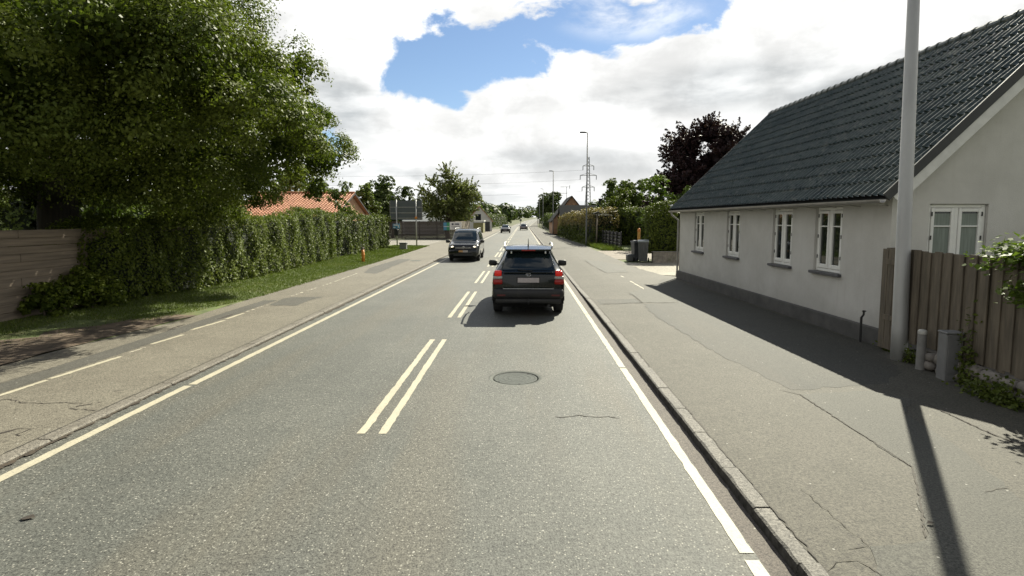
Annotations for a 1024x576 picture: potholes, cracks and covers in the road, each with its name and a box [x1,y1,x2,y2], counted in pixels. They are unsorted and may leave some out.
manhole cover [489,371,542,386]
crack [928,404,1024,446]
crack [806,492,882,576]
crack [3,389,125,411]
